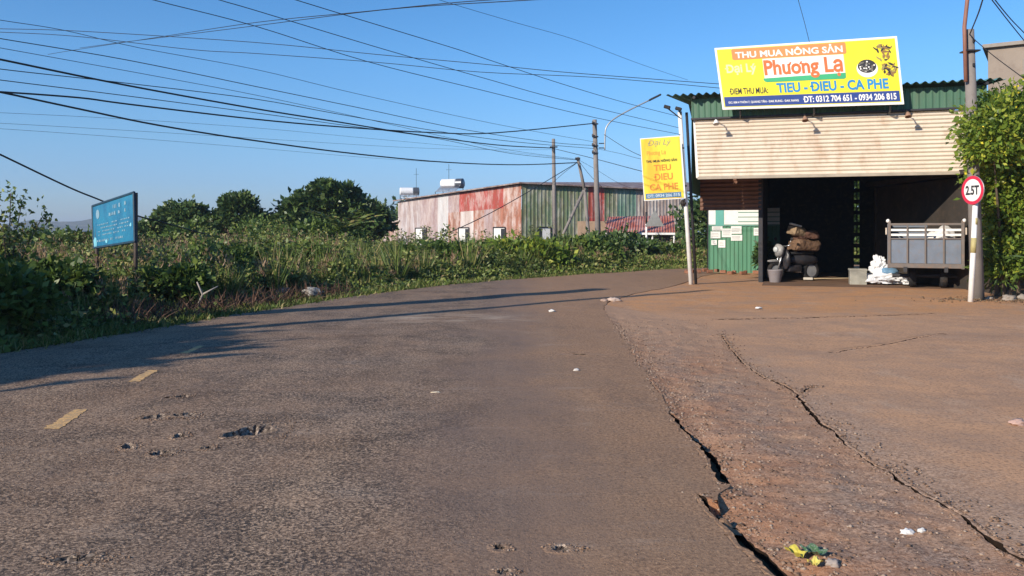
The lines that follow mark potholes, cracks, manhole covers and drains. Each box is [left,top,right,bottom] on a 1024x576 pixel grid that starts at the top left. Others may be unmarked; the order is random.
pothole [143,449,179,457]
pothole [486,542,513,553]
pothole [217,423,280,439]
pothole [39,552,107,567]
pothole [115,442,139,451]
crack [661,333,1024,576]
pothole [543,543,576,555]
pothole [488,567,518,576]
pothole [168,432,190,440]
